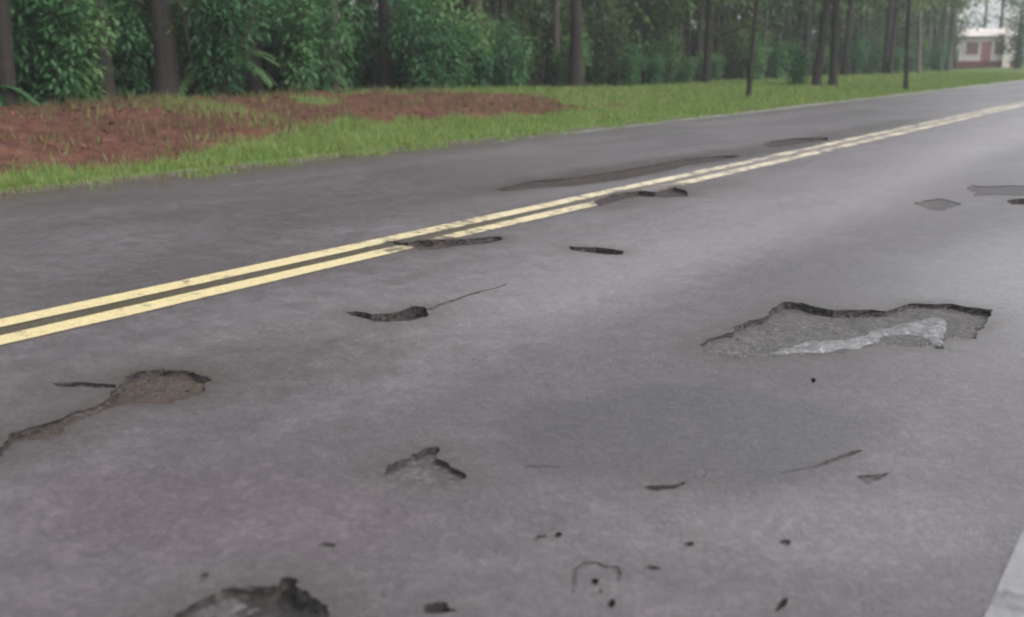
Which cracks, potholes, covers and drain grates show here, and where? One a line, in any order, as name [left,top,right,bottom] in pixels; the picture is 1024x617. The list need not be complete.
pothole [594,188,688,206]
pothole [856,473,889,484]
pothole [568,246,623,255]
pothole [915,199,961,211]
crack [571,562,622,593]
pothole [347,306,429,322]
pothole [175,577,330,617]
pothole [383,447,467,486]
pothole [967,185,1024,196]
crack [781,450,862,474]
pothole [392,237,503,251]
